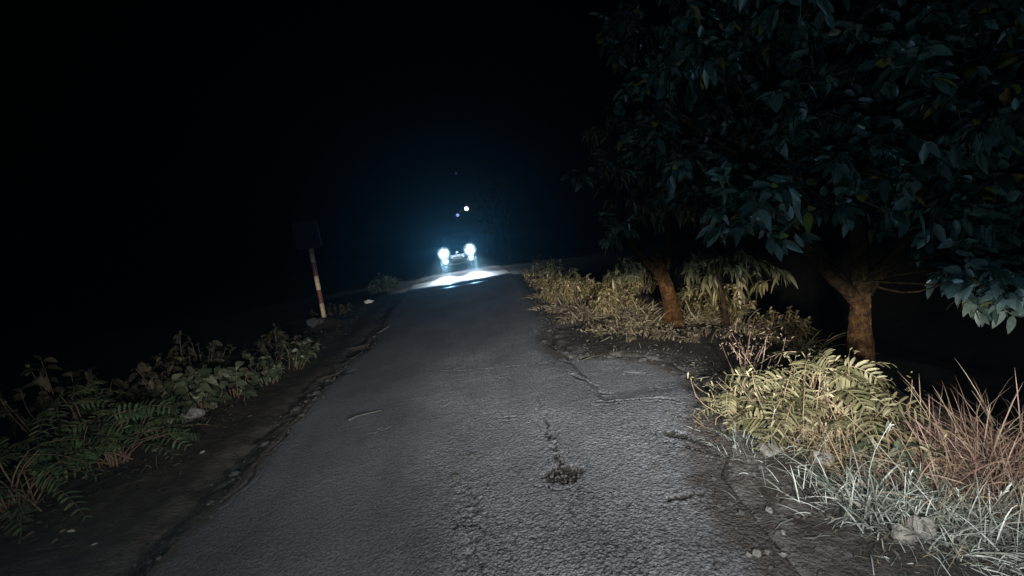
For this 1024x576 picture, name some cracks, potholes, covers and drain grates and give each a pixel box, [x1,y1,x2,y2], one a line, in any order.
crack [441,360,686,406]
pothole [528,437,596,492]
